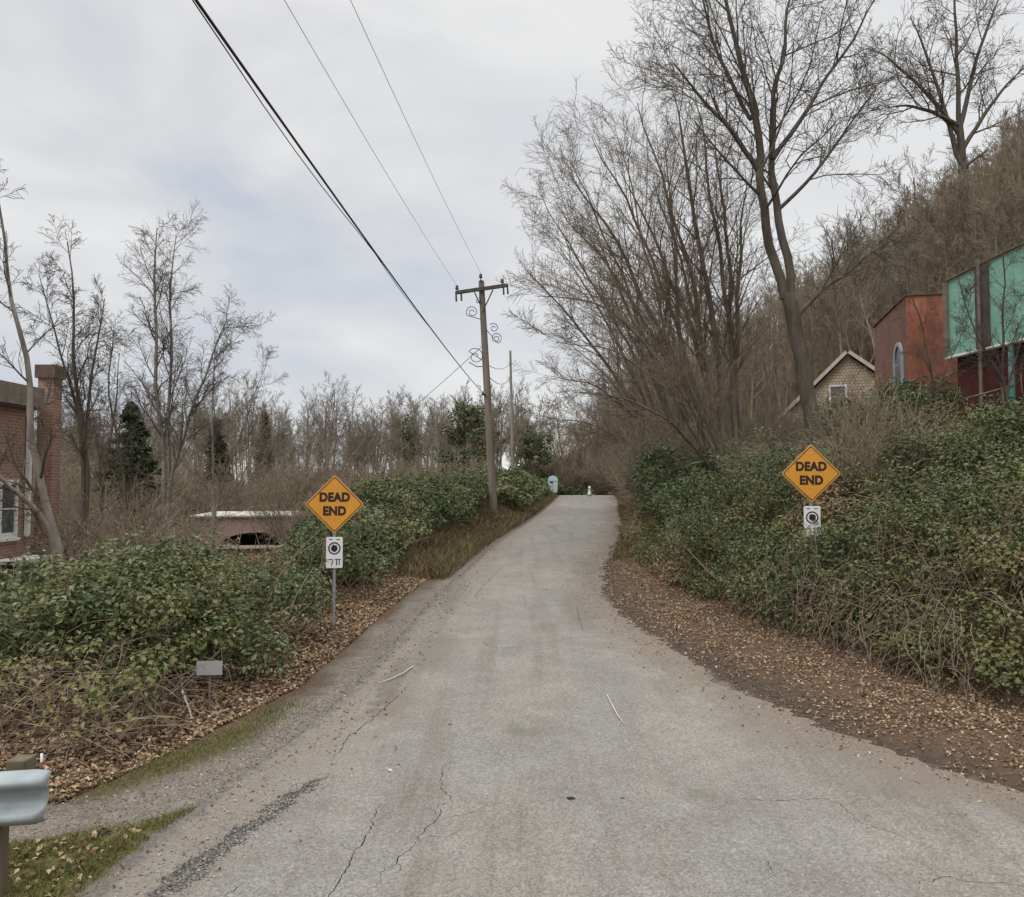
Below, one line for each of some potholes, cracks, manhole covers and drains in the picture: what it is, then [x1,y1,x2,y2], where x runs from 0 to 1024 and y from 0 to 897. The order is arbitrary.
crack [770,798,918,844]
crack [911,876,1024,887]
crack [328,804,385,897]
crack [376,761,504,887]
crack [330,683,409,762]
